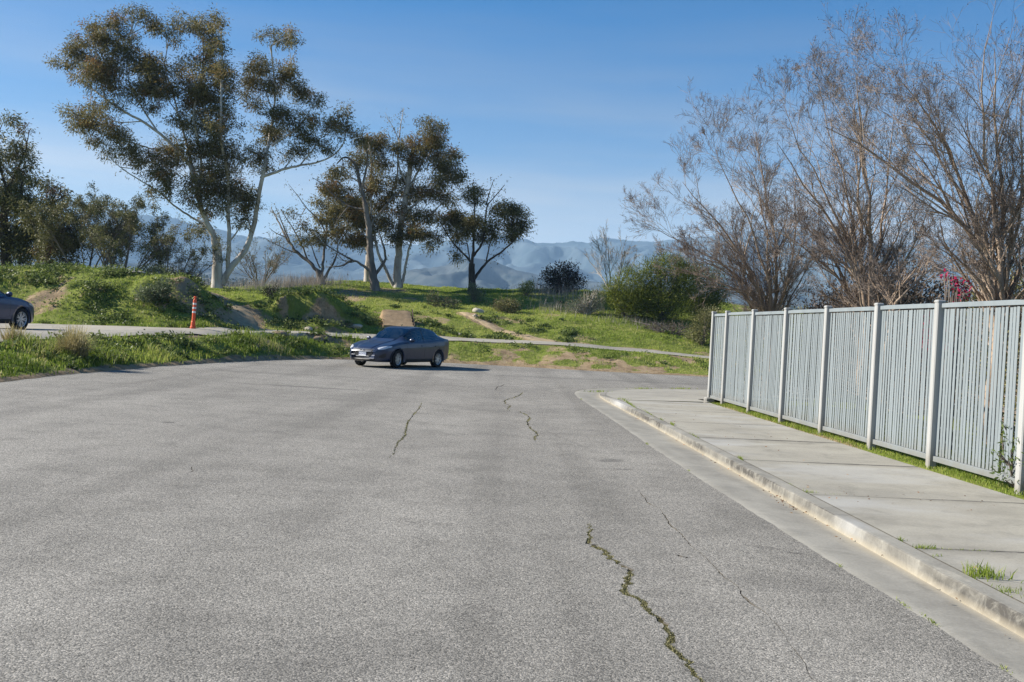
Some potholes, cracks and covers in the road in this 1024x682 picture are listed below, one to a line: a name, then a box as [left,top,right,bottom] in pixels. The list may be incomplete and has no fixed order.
crack [495,383,539,441]
crack [585,486,817,682]
crack [390,402,422,457]
